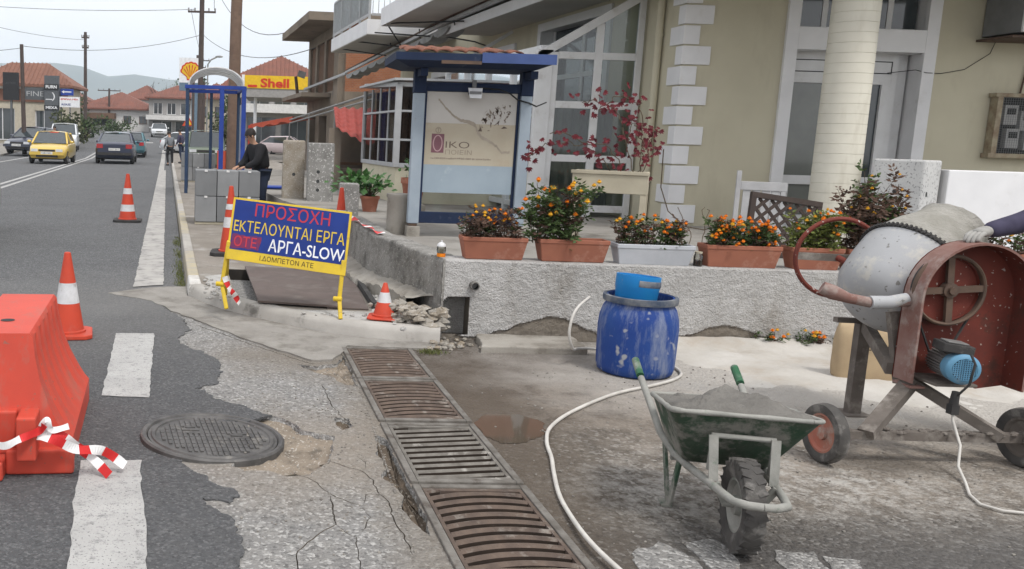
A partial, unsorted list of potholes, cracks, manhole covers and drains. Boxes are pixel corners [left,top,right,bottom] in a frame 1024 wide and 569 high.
drain grate [358,378,472,423]
crack [281,459,414,569]
drain grate [380,422,524,485]
manhole cover [140,412,284,467]
drain grate [412,484,596,569]
pothole [375,435,430,536]
pothole [231,416,335,476]
drain grate [342,347,437,380]
